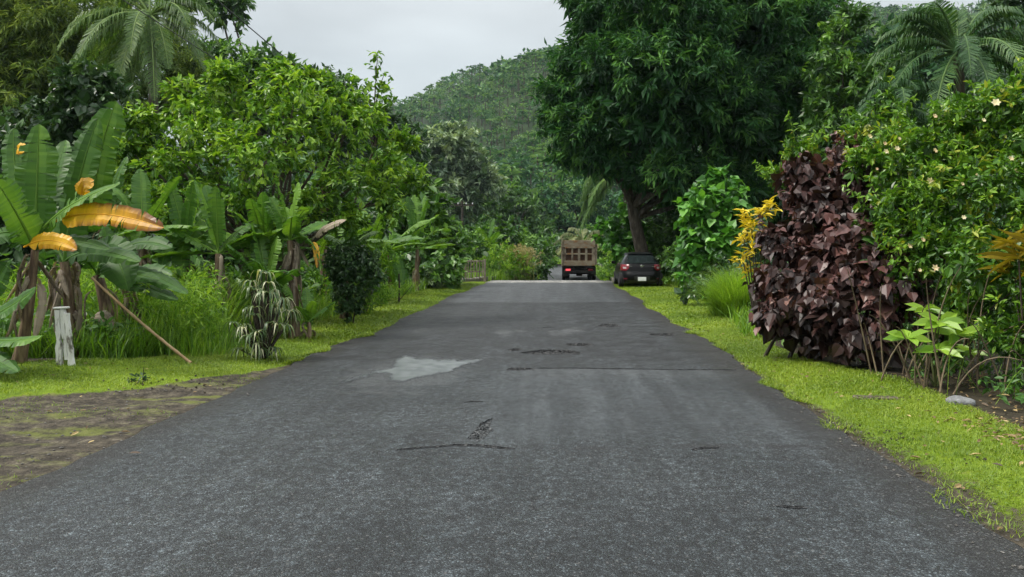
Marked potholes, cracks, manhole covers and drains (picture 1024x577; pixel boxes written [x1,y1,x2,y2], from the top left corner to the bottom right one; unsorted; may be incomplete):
pothole [468,418,494,441]
